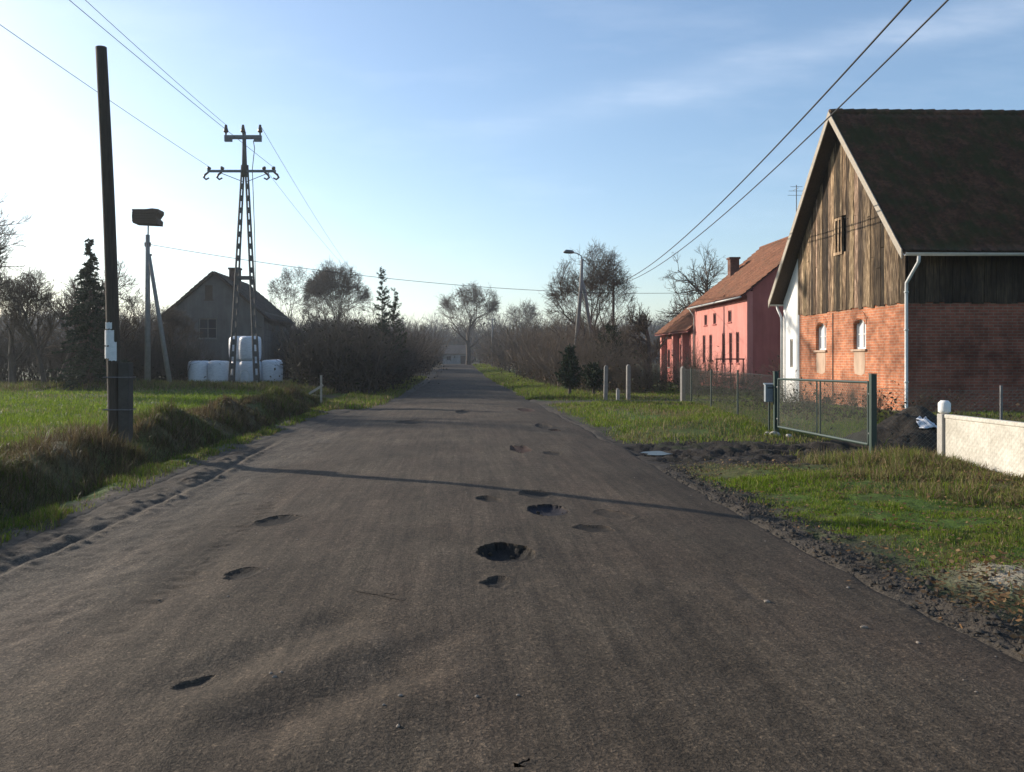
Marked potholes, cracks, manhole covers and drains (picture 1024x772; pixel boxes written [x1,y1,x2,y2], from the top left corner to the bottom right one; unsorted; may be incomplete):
pothole [217,565,267,582]
pothole [523,503,573,517]
pothole [247,514,307,528]
pothole [471,541,542,564]
pothole [505,445,536,454]
pothole [471,495,506,503]
pothole [514,490,556,499]
pothole [472,574,517,590]
pothole [160,672,223,693]
pothole [567,524,621,534]
crack [351,590,405,602]
